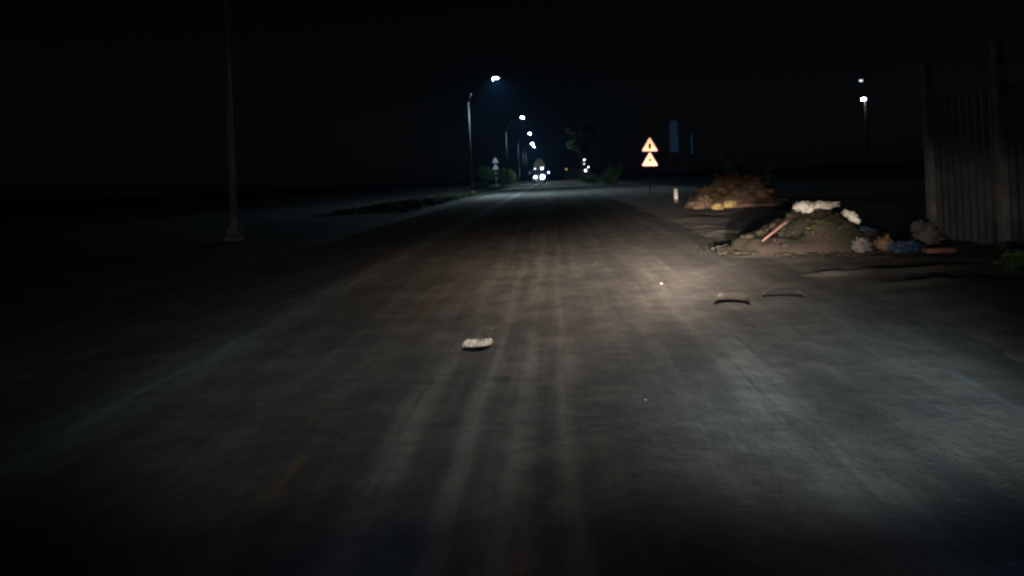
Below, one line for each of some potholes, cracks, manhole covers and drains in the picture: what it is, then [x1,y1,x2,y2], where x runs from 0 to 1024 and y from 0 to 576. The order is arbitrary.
pothole [713,291,751,305]
pothole [762,288,807,297]
